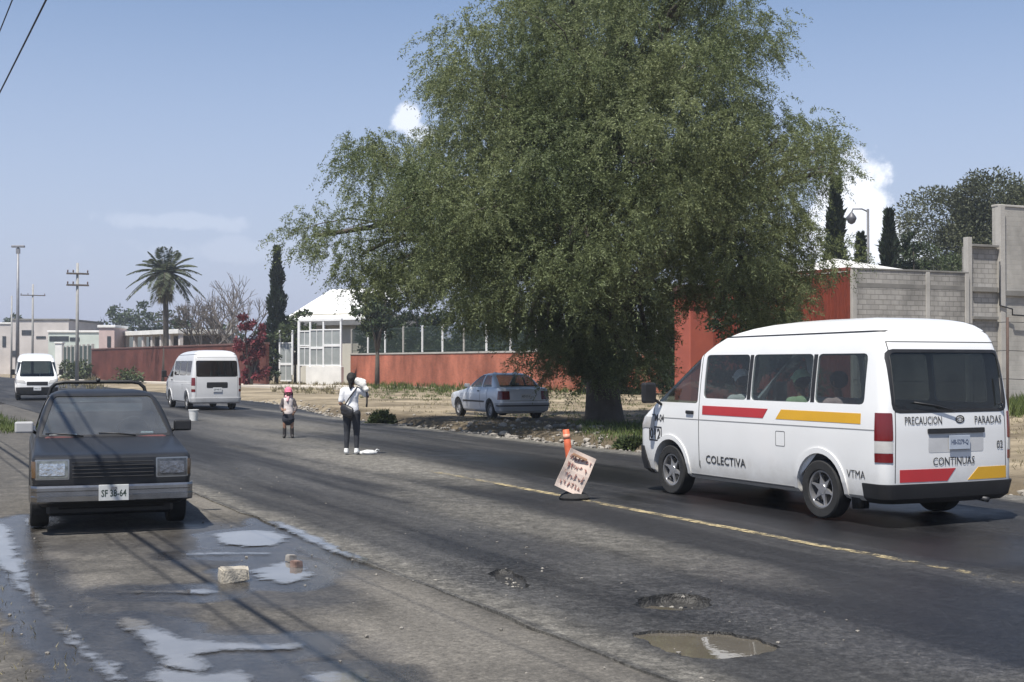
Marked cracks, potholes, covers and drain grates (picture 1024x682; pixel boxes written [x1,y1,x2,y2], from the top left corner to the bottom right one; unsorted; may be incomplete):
pothole [633,593,712,610]
pothole [632,630,780,648]
pothole [488,569,530,589]
